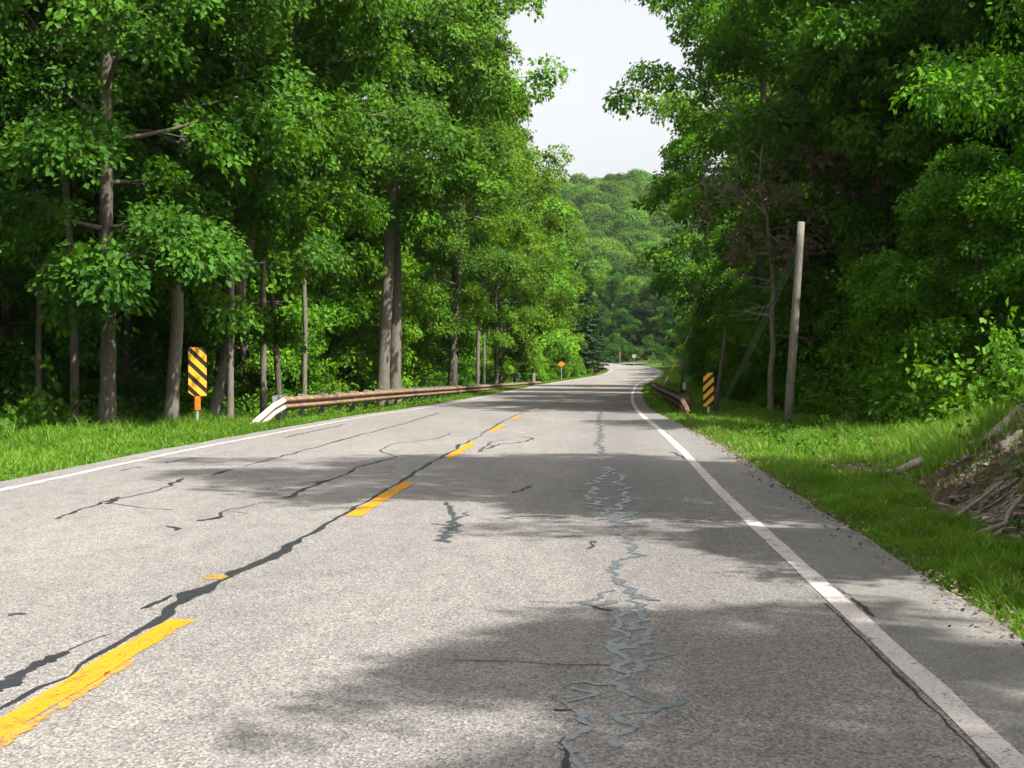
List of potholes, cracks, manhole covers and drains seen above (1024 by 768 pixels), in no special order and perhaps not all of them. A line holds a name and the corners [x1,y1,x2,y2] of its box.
crack [54,457,254,531]
crack [455,412,688,768]
